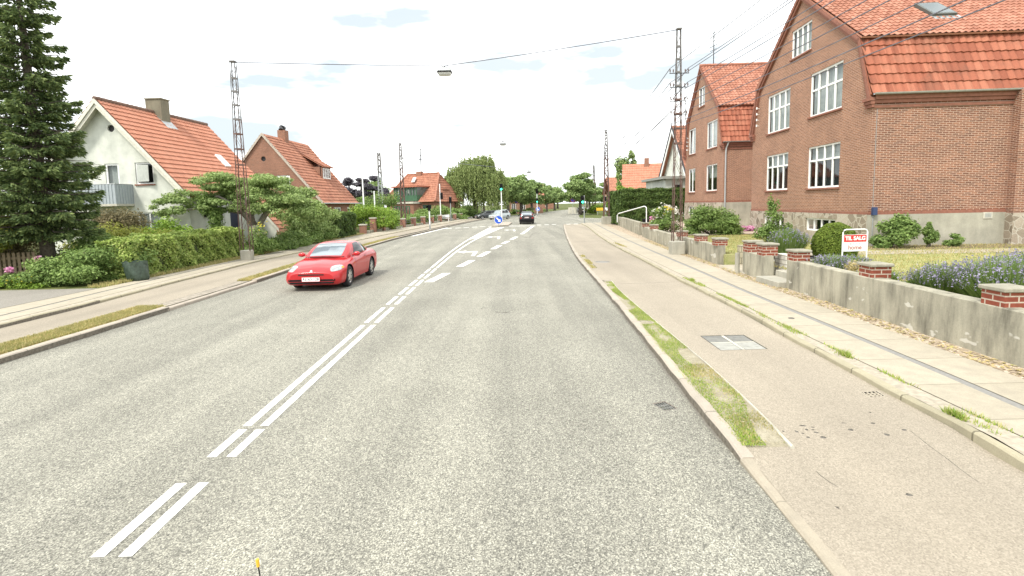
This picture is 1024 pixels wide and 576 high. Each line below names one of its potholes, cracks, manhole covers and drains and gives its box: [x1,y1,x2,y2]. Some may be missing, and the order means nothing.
drain grate [652,401,678,411]
manhole cover [701,335,766,350]
